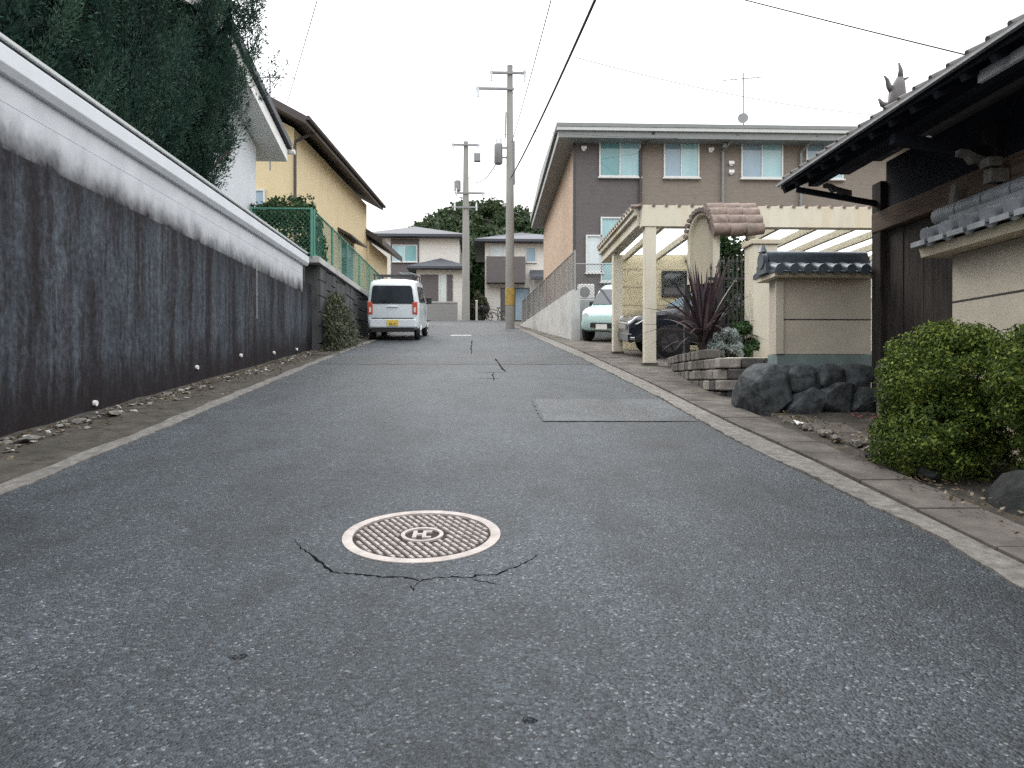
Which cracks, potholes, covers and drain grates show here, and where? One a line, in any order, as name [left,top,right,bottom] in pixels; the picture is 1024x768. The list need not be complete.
crack [477,358,506,381]
manhole cover [342,510,501,563]
crack [294,539,538,591]
